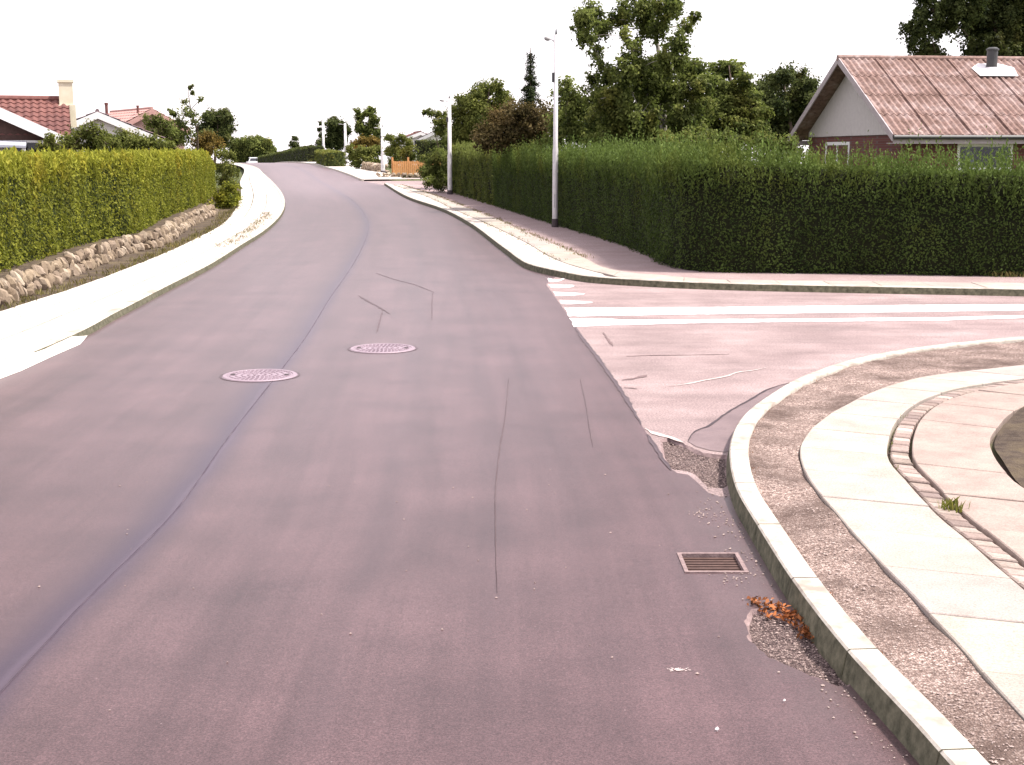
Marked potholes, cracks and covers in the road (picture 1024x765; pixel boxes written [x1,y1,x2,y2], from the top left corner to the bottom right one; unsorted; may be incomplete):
crack [360,296,390,330]
crack [494,379,509,585]
drain grate [677,552,749,573]
pothole [660,438,728,488]
manhole cover [348,343,417,354]
pothole [744,608,850,686]
manhole cover [219,369,300,382]
